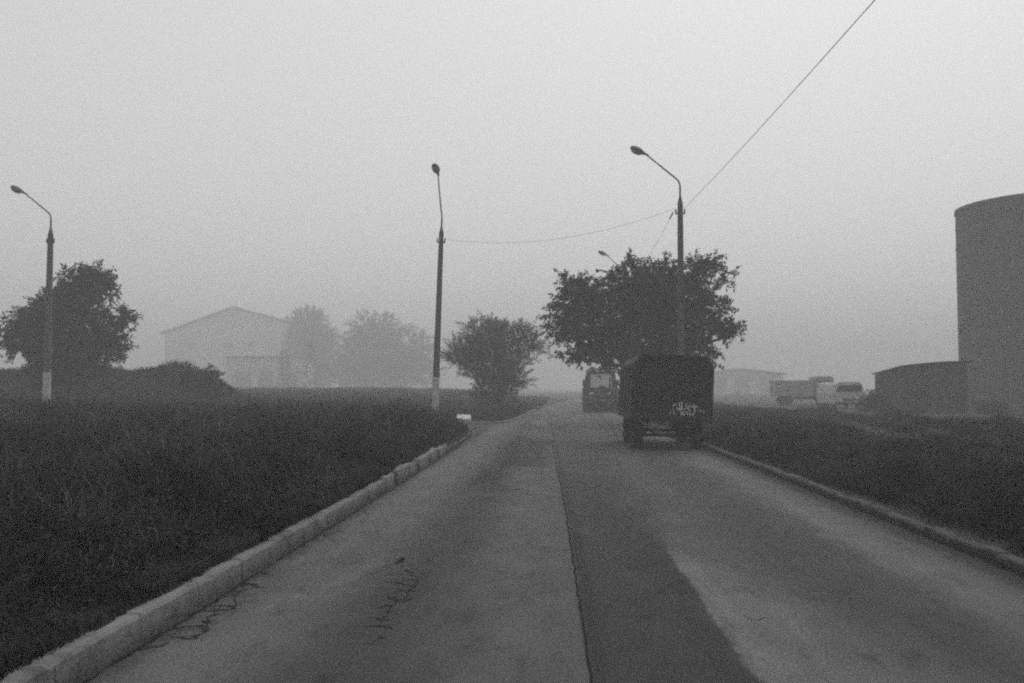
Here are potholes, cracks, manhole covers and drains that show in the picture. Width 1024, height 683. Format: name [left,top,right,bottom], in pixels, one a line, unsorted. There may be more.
crack [83,446,460,683]
